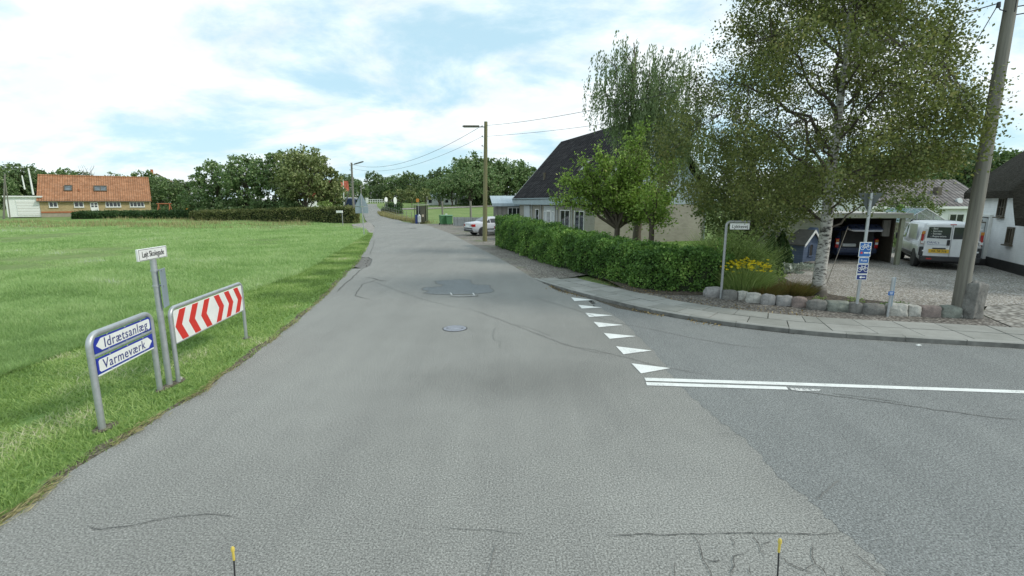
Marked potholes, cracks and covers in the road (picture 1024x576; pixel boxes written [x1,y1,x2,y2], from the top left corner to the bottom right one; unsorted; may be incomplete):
crack [457,528,513,575]
crack [608,532,880,576]
crack [789,389,1024,421]
crack [338,244,478,307]
crack [84,513,237,529]
